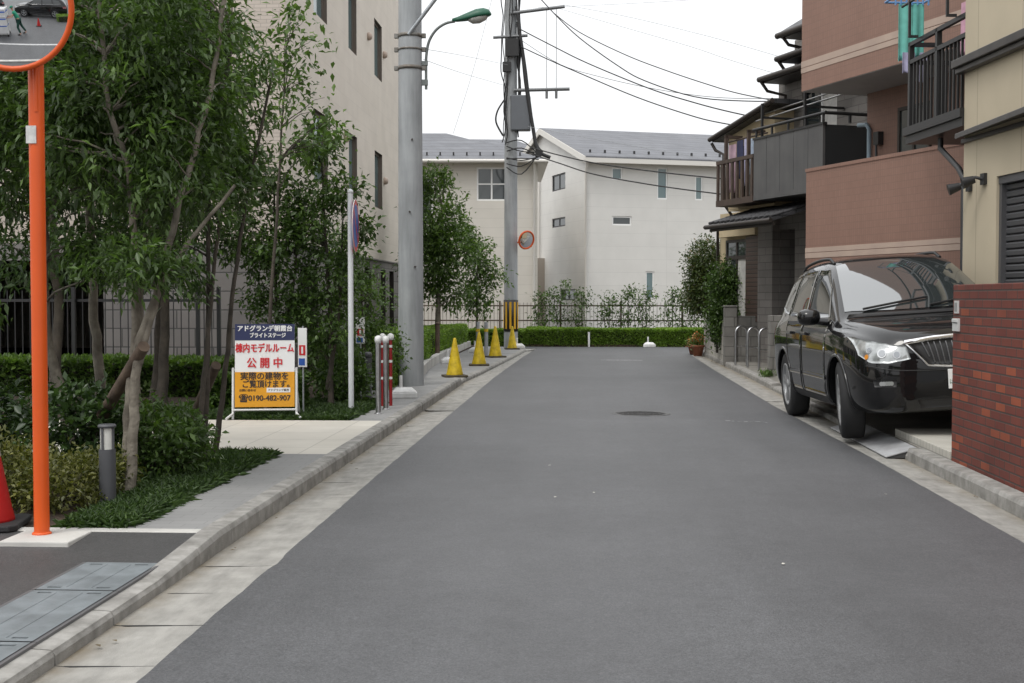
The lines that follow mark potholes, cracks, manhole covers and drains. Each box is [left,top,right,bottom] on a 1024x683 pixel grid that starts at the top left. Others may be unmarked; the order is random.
utility cover [31,562,158,593]
utility cover [0,590,118,645]
utility cover [0,642,37,668]
